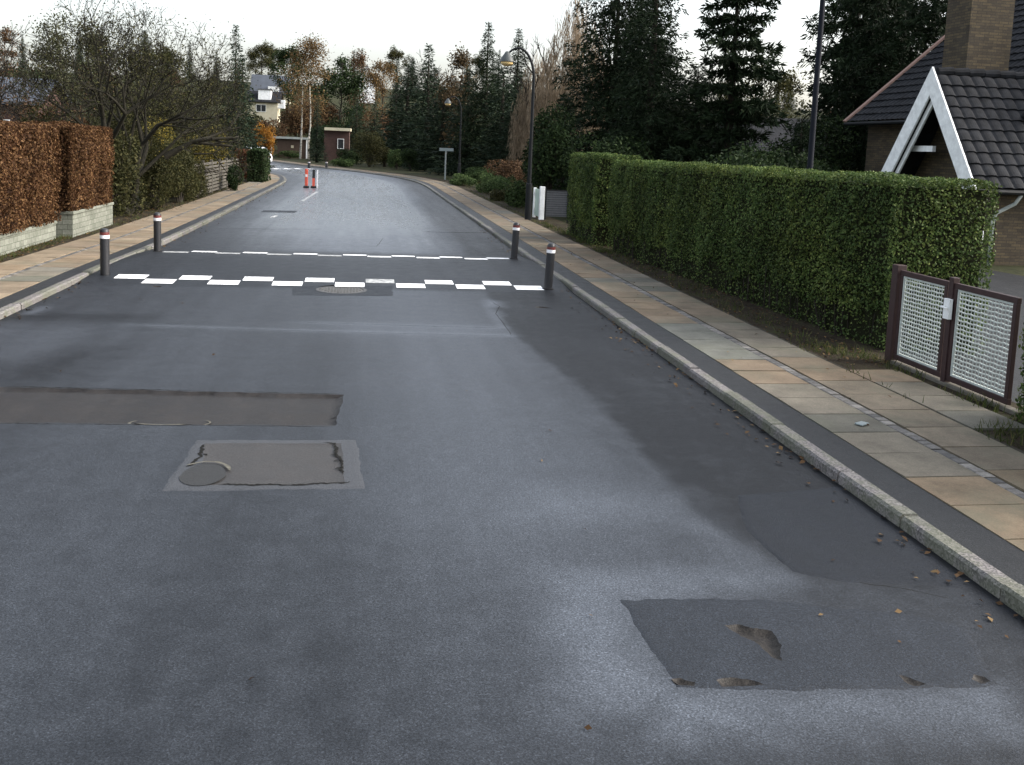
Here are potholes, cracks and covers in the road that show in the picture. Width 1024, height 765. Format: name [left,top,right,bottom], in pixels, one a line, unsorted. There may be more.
pothole [725,624,782,661]
pothole [899,675,925,686]
crack [4,423,350,486]
pothole [717,677,763,687]
manhole cover [316,286,367,294]
pothole [672,678,695,686]
